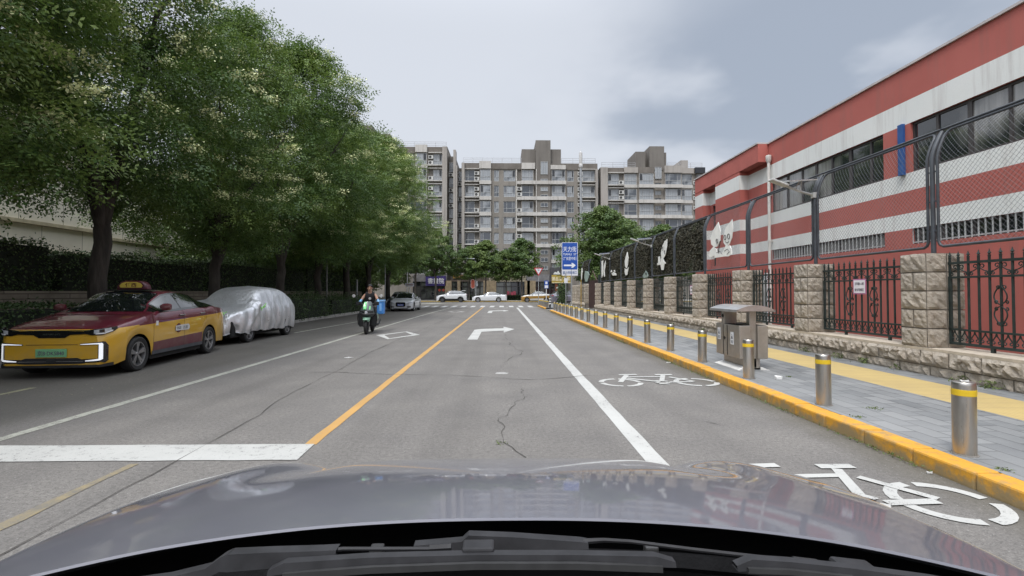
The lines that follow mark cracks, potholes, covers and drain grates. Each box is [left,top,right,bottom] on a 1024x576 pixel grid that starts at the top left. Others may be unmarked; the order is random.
crack [346,335,616,458]
